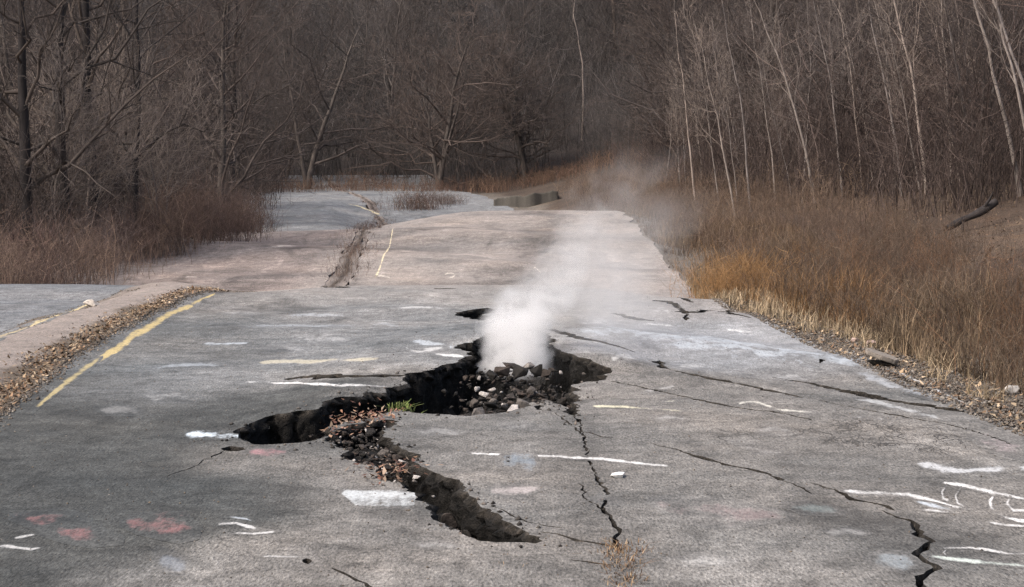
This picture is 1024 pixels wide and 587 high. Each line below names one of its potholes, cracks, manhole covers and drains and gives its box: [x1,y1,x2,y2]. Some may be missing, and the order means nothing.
pothole [455,308,494,321]
crack [168,297,1021,587]
